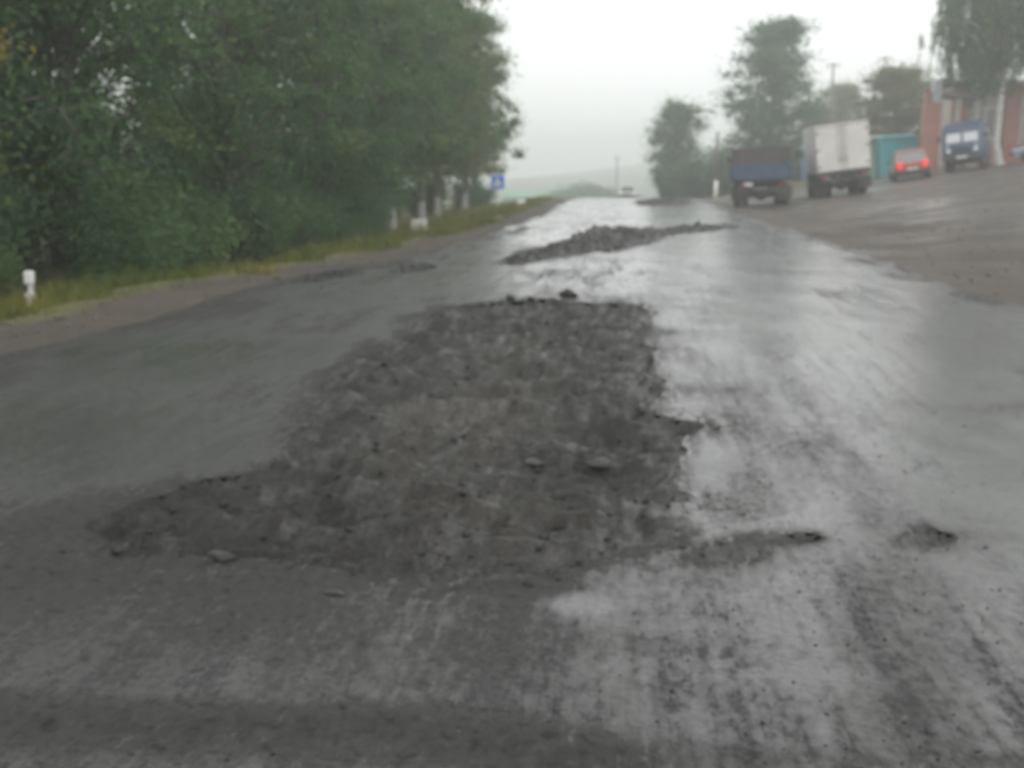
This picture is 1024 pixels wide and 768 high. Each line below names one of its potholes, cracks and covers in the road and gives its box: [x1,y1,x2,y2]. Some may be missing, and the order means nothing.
pothole [902,526,958,548]
pothole [694,532,824,563]
pothole [498,222,734,265]
pothole [83,298,713,579]
